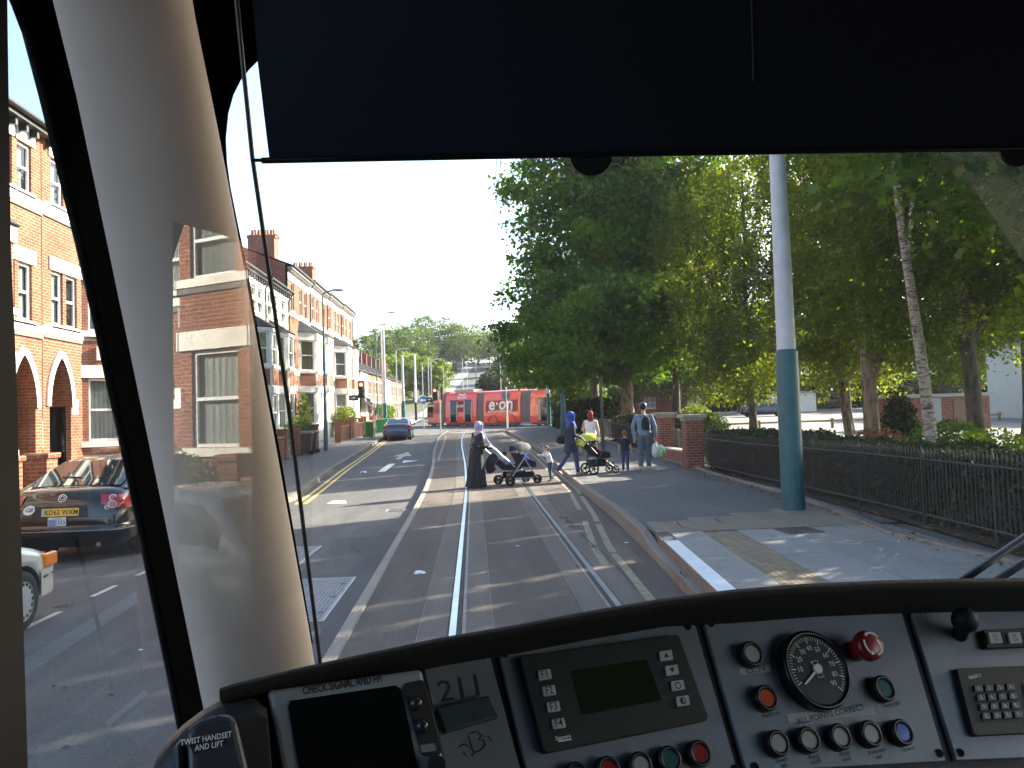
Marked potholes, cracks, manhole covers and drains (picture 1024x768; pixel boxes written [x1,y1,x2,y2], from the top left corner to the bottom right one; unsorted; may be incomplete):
manhole cover [302,577,356,622]
manhole cover [772,526,825,534]
